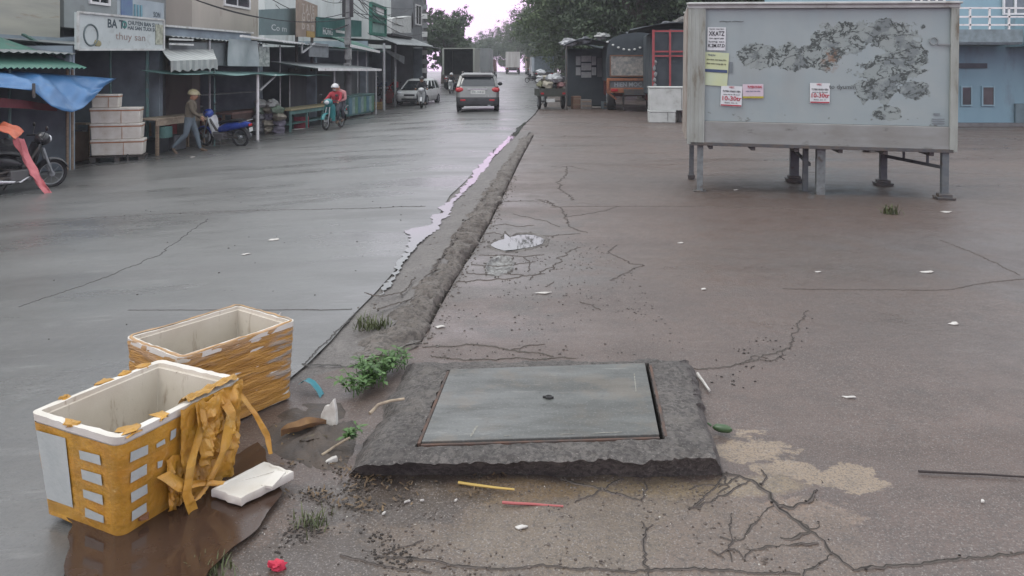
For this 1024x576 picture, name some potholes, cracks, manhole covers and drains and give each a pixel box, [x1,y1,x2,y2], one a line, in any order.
crack [607,245,645,279]
crack [941,240,1019,275]
crack [641,521,653,576]
crack [687,469,854,576]
manhole cover [349,358,723,478]
crack [694,310,809,370]
crack [19,219,208,307]
pothole [484,231,554,253]
crack [456,166,620,287]
